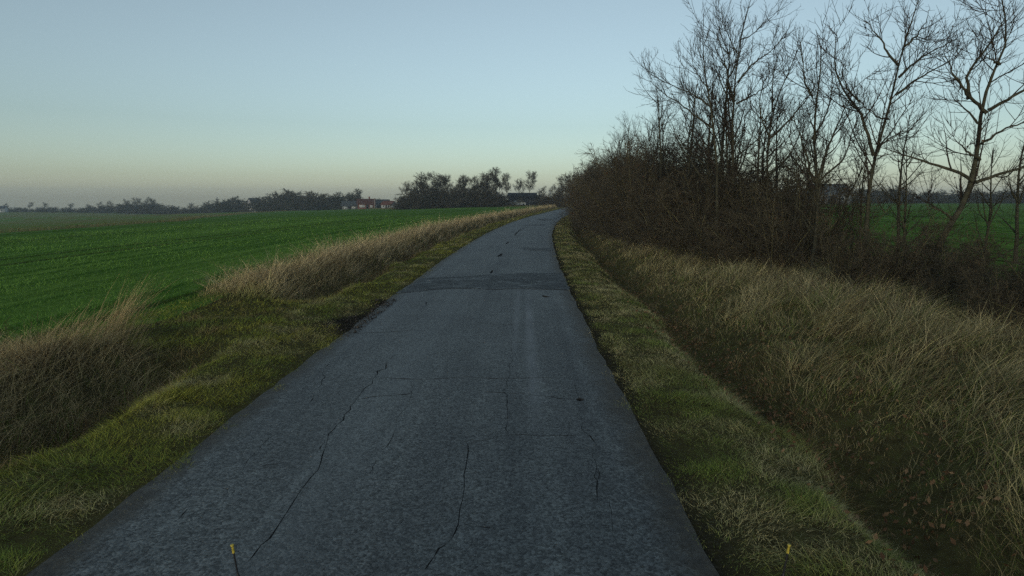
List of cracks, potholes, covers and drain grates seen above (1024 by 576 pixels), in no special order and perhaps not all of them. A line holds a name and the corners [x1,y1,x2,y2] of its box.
crack [249,316,613,569]
